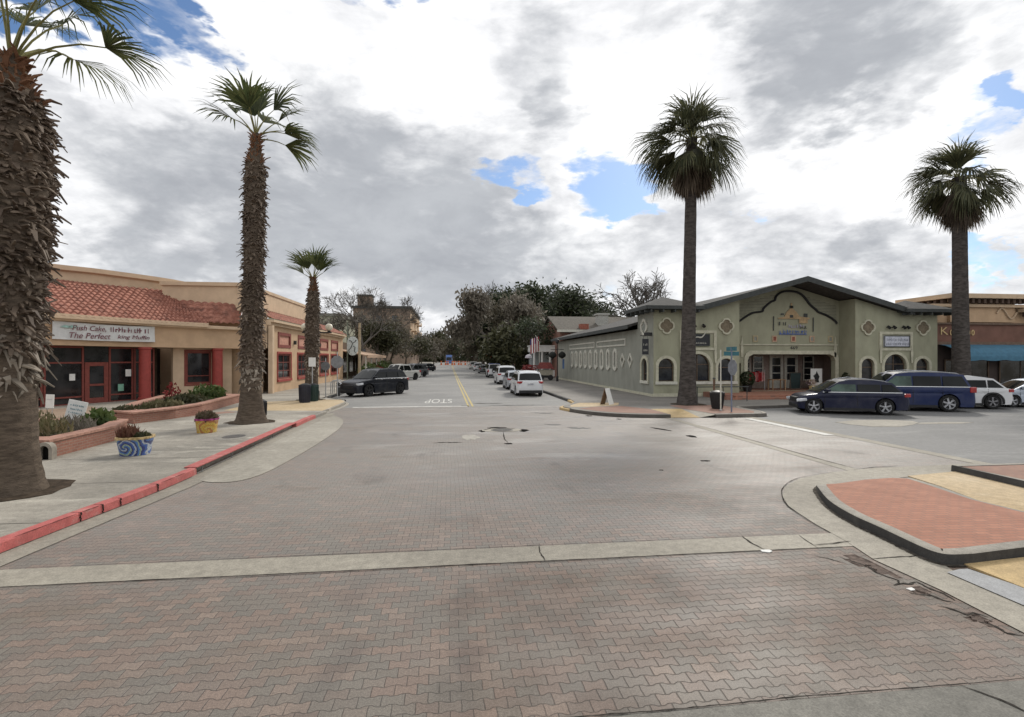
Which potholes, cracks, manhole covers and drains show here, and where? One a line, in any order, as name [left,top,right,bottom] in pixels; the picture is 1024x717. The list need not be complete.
crack [813,541,1019,635]
